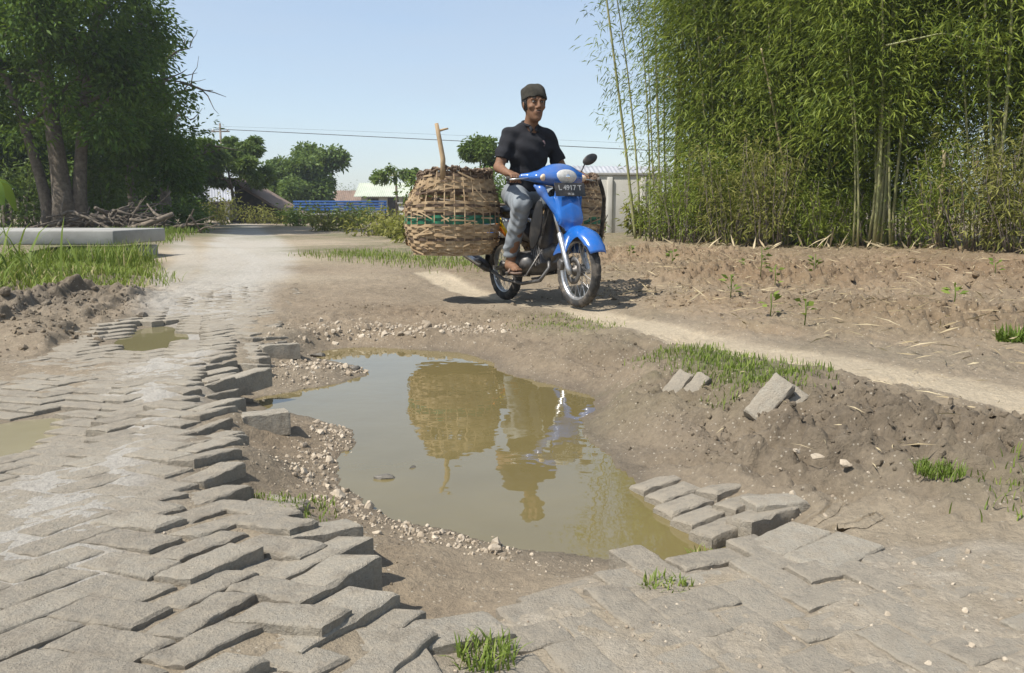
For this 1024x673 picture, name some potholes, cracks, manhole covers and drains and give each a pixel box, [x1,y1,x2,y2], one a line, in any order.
pothole [242,328,733,623]
